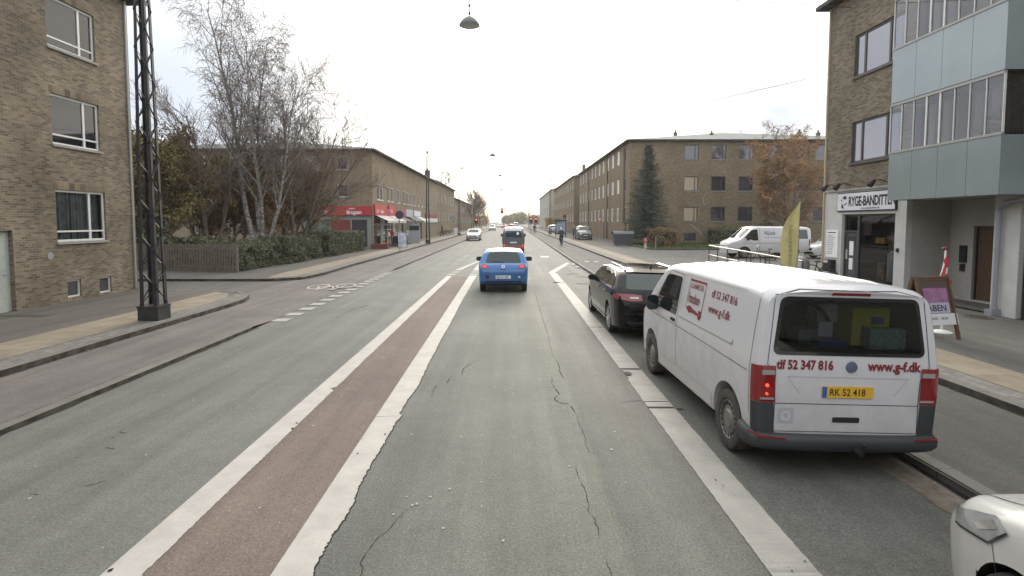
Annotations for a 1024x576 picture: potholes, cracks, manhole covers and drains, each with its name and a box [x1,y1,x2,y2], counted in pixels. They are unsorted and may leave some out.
crack [576,467,612,576]
crack [534,291,588,448]
